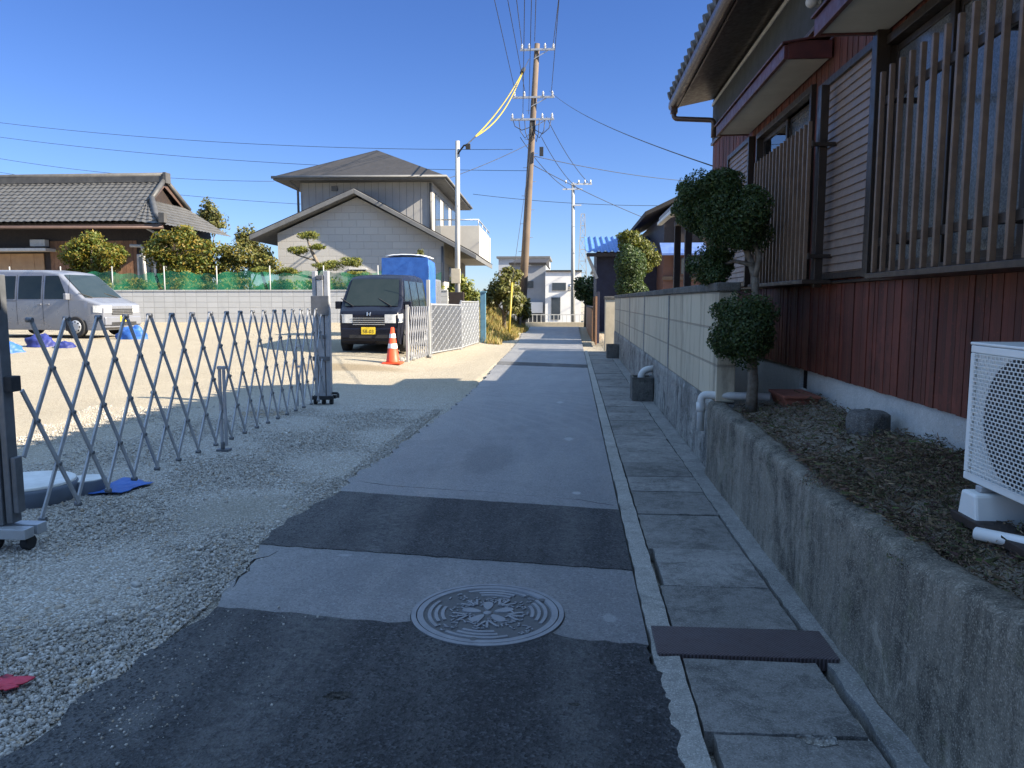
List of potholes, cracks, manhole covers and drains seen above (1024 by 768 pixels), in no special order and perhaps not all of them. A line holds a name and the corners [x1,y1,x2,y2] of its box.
manhole cover [411,584,564,647]
pothole [796,735,838,747]
crack [233,551,278,587]
